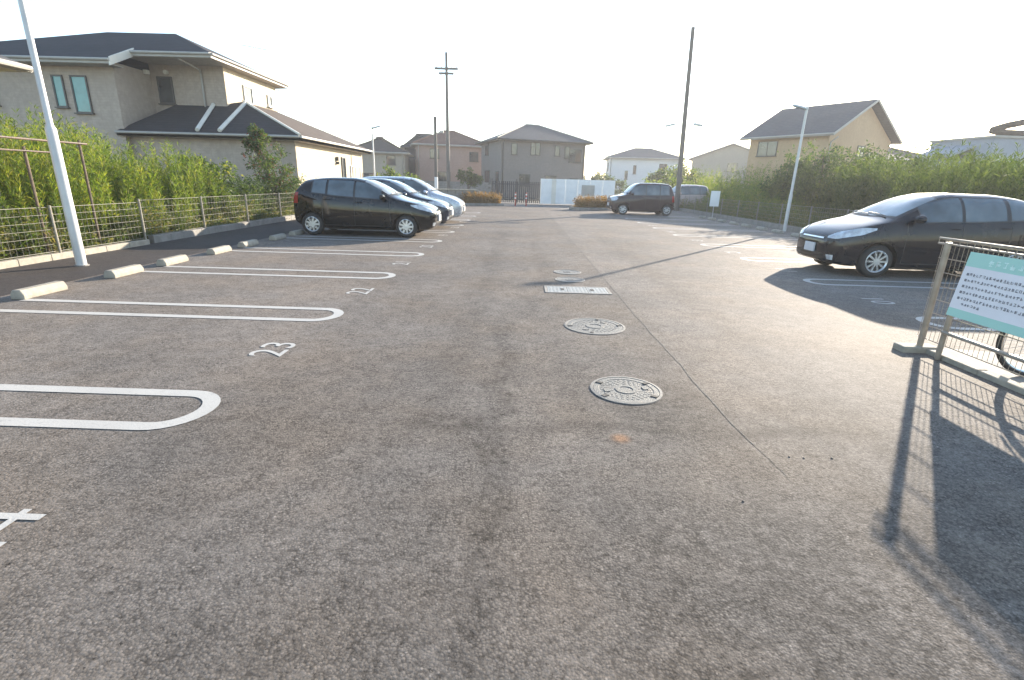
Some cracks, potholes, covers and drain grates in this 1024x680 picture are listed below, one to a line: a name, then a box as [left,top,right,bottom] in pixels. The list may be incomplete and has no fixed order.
manhole cover [563,318,627,335]
manhole cover [589,376,664,405]
